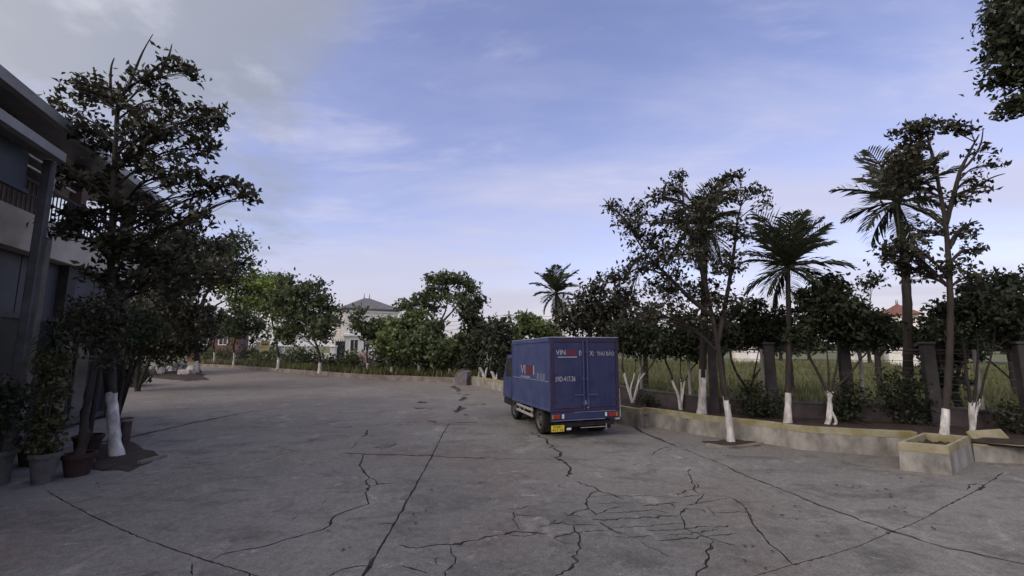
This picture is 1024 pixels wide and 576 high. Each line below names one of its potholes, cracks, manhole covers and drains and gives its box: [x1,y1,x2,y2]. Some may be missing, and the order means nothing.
crack [210,426,395,561]
crack [401,432,792,576]
